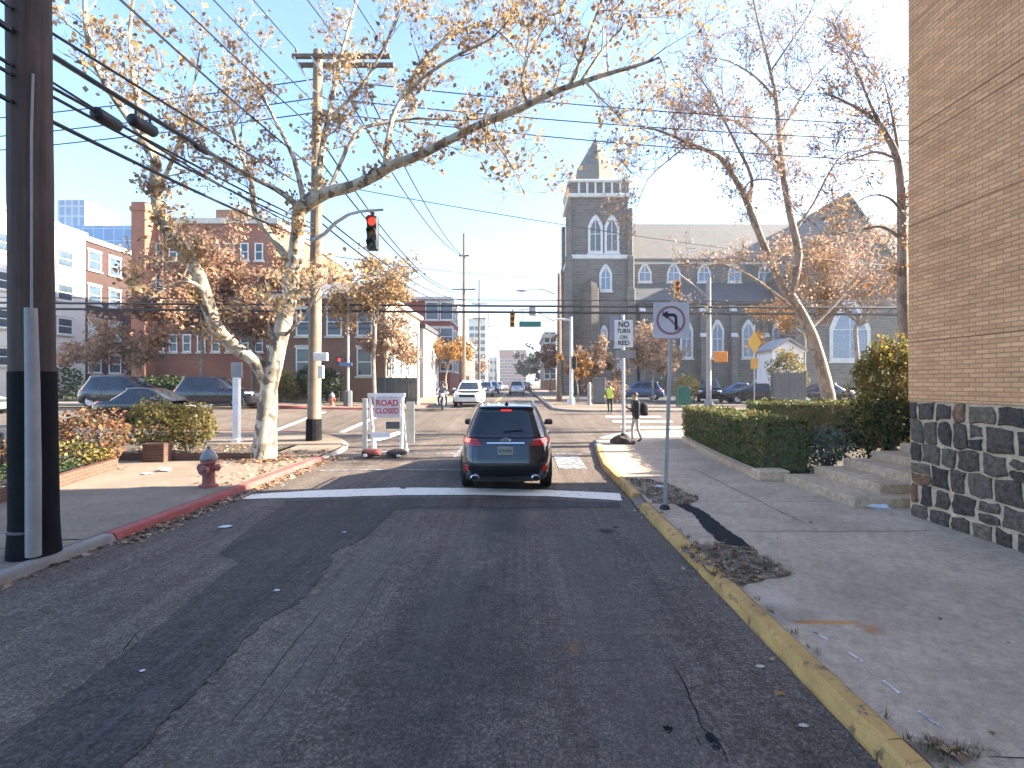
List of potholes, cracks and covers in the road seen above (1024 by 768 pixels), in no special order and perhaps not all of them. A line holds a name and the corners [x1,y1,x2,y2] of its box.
crack [671,659,737,765]
